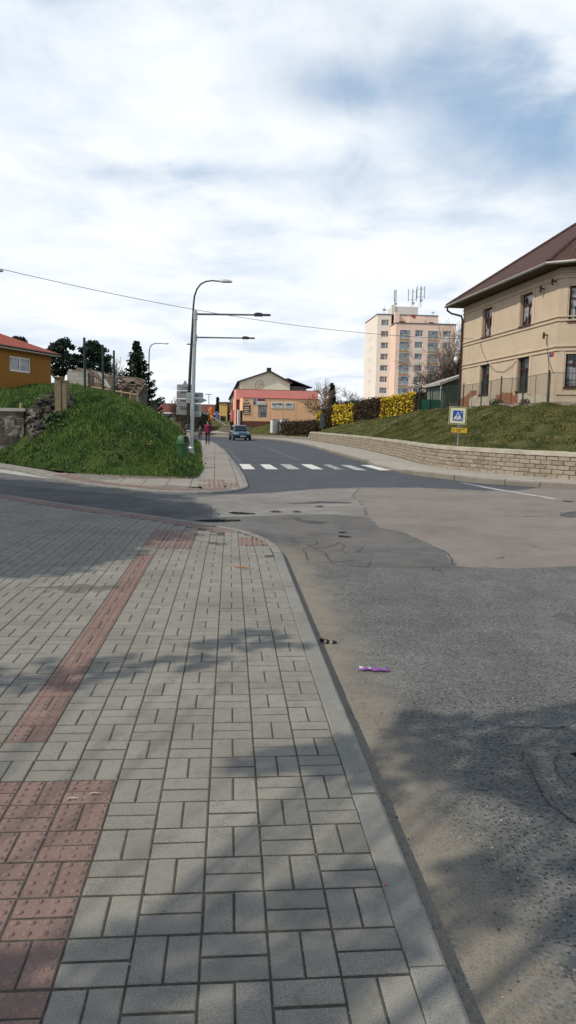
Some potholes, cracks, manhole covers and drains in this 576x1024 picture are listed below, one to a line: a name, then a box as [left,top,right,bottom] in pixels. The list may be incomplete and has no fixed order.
crack [291,535,390,567]
